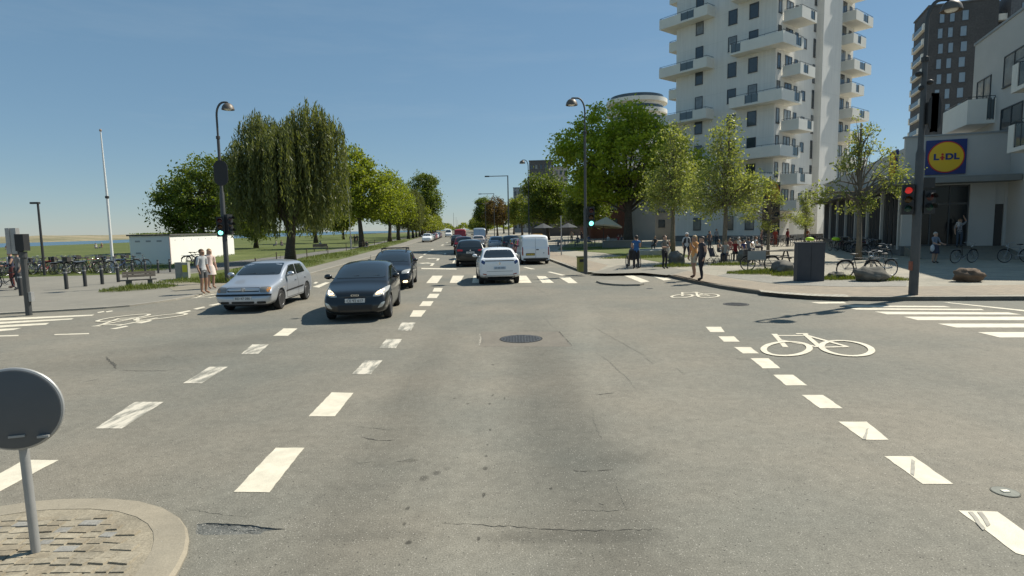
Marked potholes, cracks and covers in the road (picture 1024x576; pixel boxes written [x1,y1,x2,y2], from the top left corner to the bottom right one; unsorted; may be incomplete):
manhole cover [500,335,543,343]
manhole cover [990,486,1021,498]
pothole [196,523,282,535]
